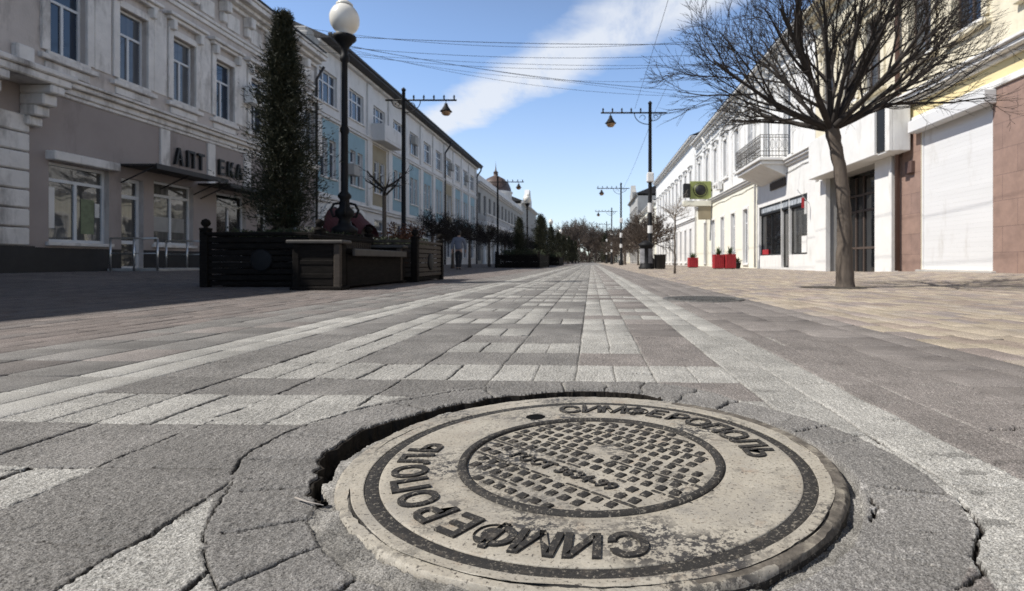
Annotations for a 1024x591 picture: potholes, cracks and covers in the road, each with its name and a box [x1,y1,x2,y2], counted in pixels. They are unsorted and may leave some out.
manhole cover [334,397,850,591]
crack [962,507,985,587]
